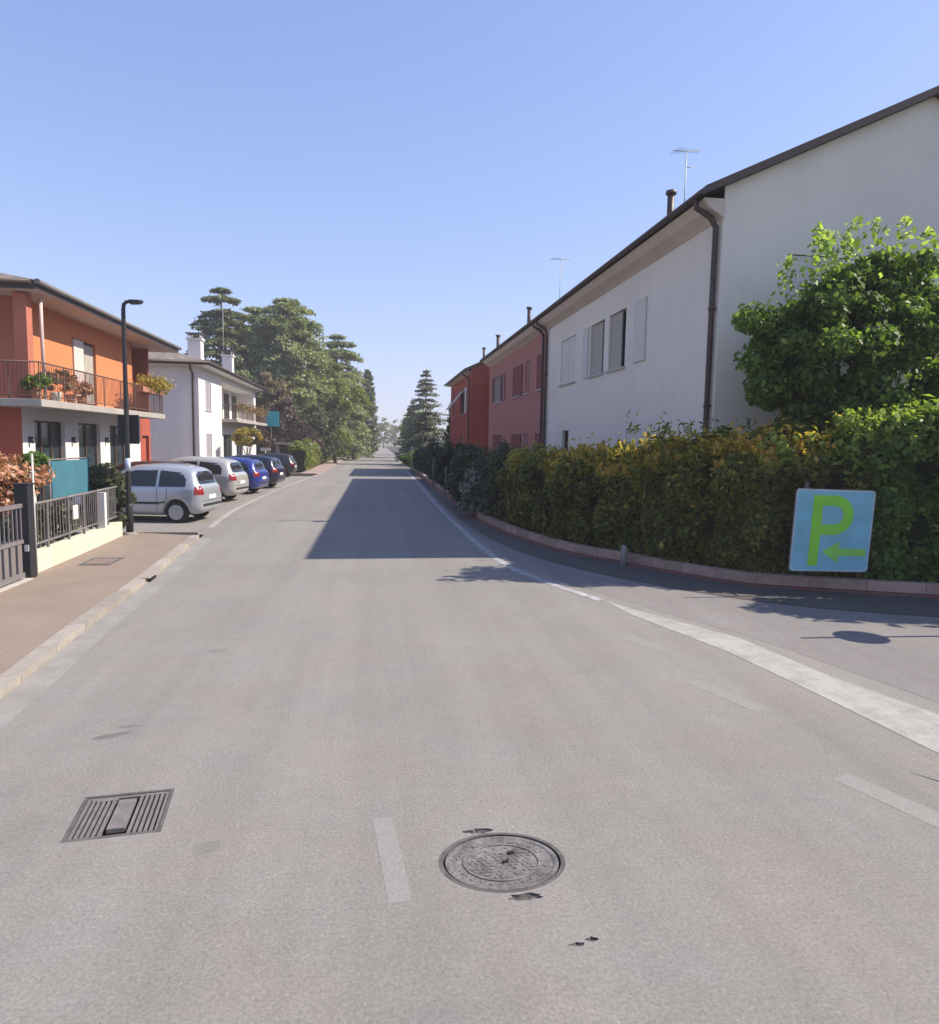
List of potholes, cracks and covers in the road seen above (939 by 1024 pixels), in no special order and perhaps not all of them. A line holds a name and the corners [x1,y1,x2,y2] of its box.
manhole cover [439,832,565,893]
utility cover [76,557,125,566]
drain grate [60,788,175,843]
pothole [508,892,543,901]
